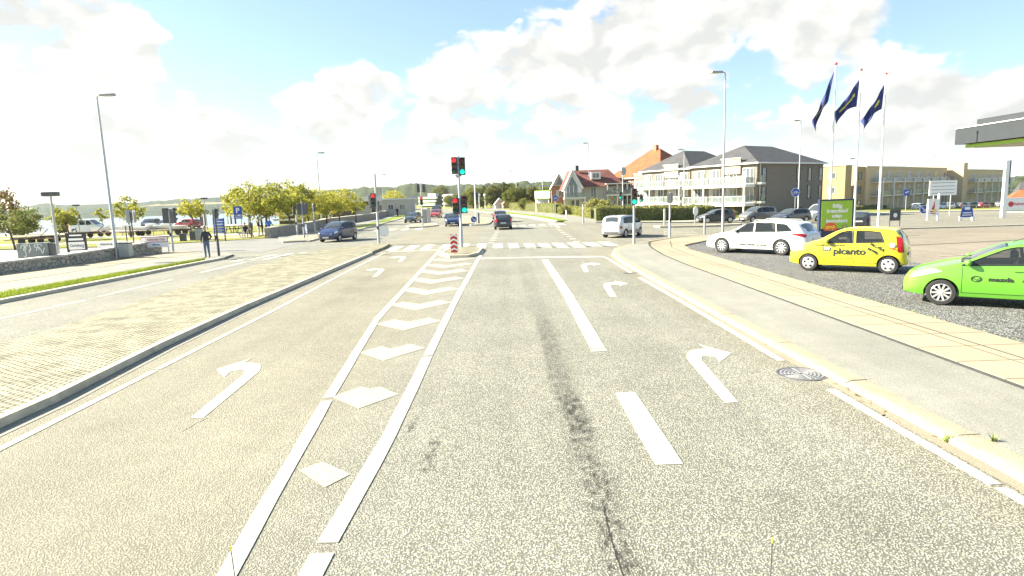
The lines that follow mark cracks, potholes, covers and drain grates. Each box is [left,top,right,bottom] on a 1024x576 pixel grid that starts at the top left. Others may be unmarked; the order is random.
manhole cover [776,367,827,381]
crack [603,506,624,576]
